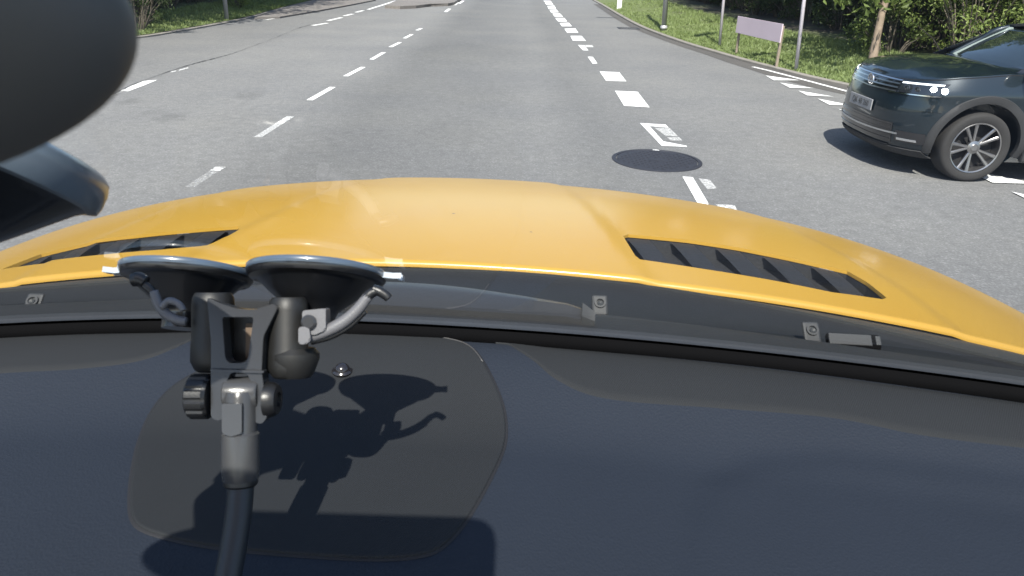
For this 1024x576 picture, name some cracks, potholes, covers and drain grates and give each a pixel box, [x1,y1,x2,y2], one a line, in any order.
manhole cover [612,149,703,172]
